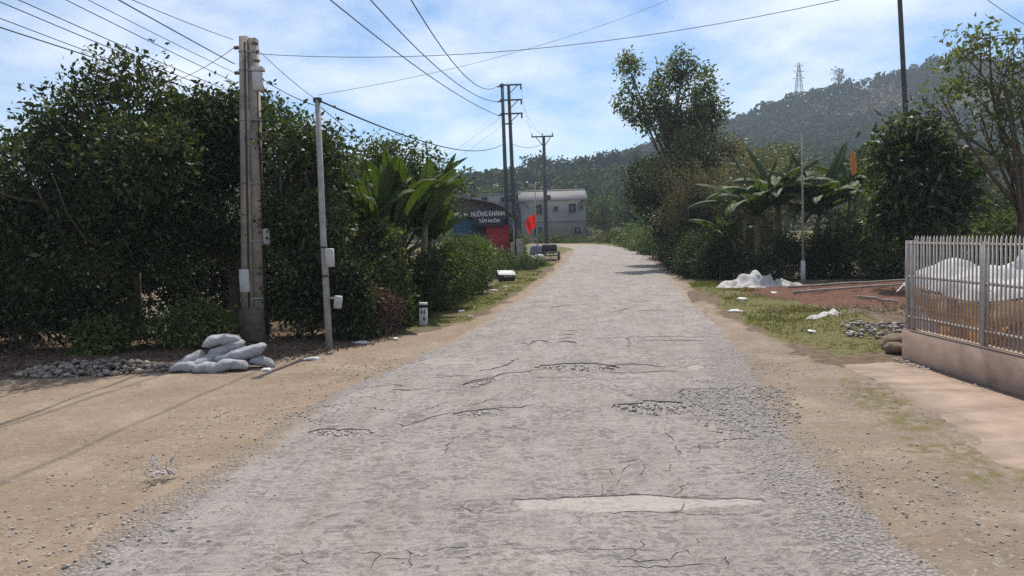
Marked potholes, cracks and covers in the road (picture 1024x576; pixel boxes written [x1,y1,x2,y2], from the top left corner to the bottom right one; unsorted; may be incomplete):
crack [533,433,756,516]
pothole [463,378,496,388]
crack [583,538,729,568]
pothole [308,428,375,438]
crack [365,330,750,426]
crack [353,546,469,569]
pothole [535,362,620,371]
pothole [611,400,687,417]
pothole [453,408,503,418]
